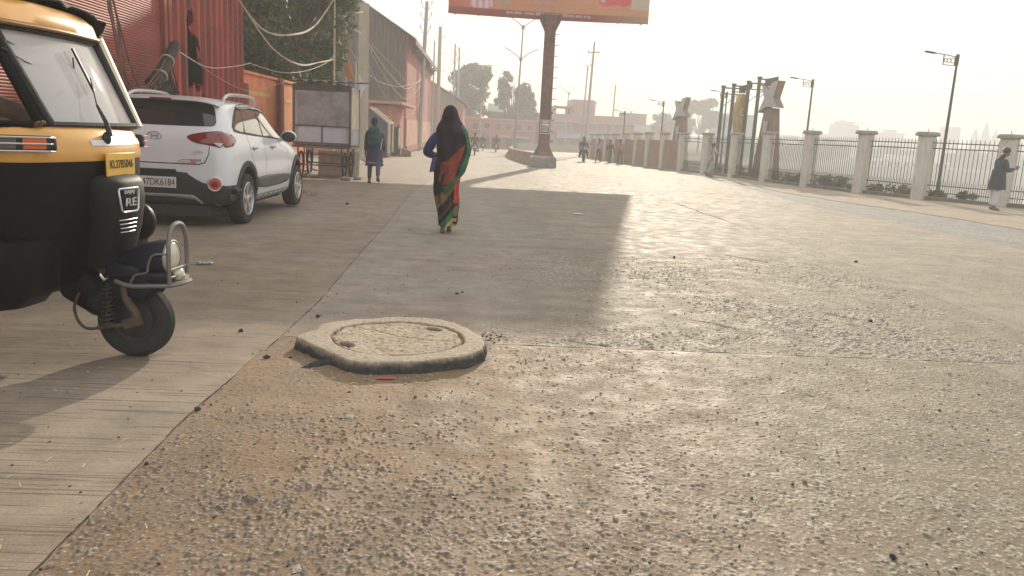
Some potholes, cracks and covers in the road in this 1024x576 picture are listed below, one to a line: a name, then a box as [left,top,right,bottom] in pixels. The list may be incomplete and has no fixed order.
manhole cover [294,317,487,375]
